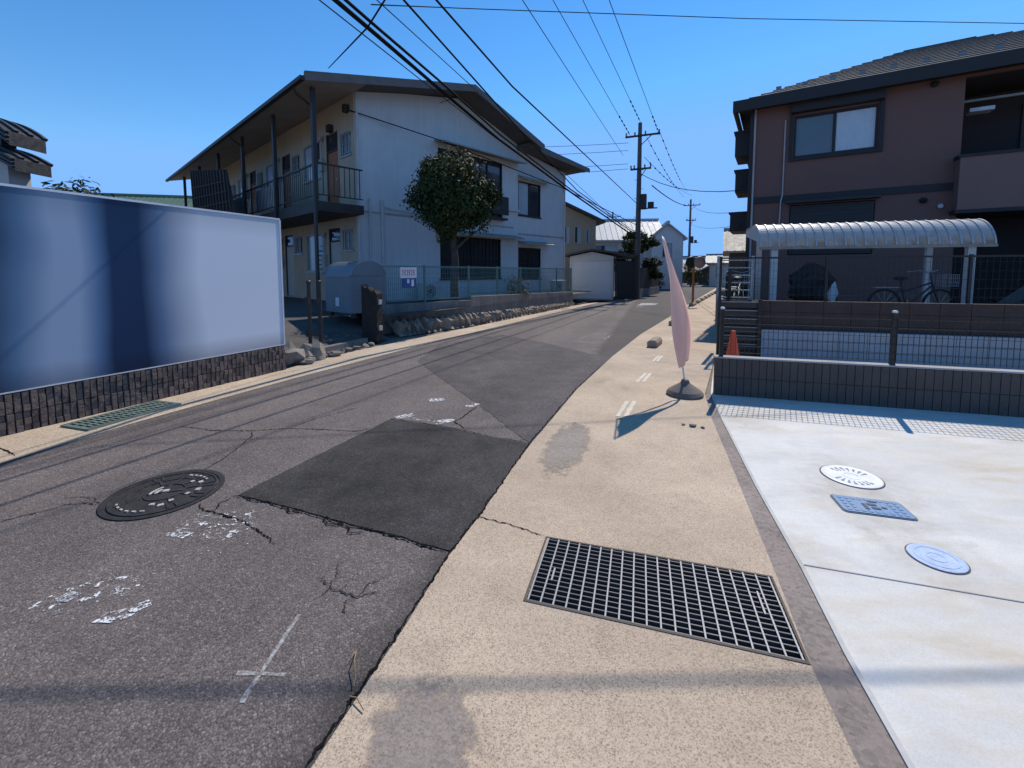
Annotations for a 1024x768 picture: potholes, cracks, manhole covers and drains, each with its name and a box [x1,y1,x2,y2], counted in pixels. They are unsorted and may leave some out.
drain grate [60,400,181,431]
manhole cover [97,469,225,521]
crack [199,369,598,766]
drain grate [523,536,811,665]
crack [3,496,100,521]
